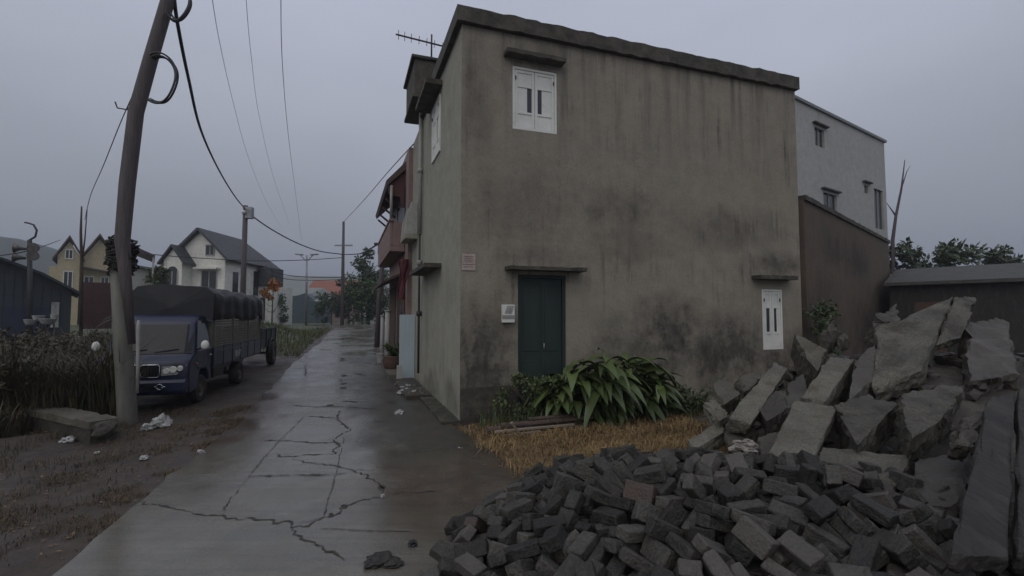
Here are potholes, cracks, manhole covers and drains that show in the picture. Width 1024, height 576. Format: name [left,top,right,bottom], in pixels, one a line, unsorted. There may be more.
crack [135,401,440,560]
